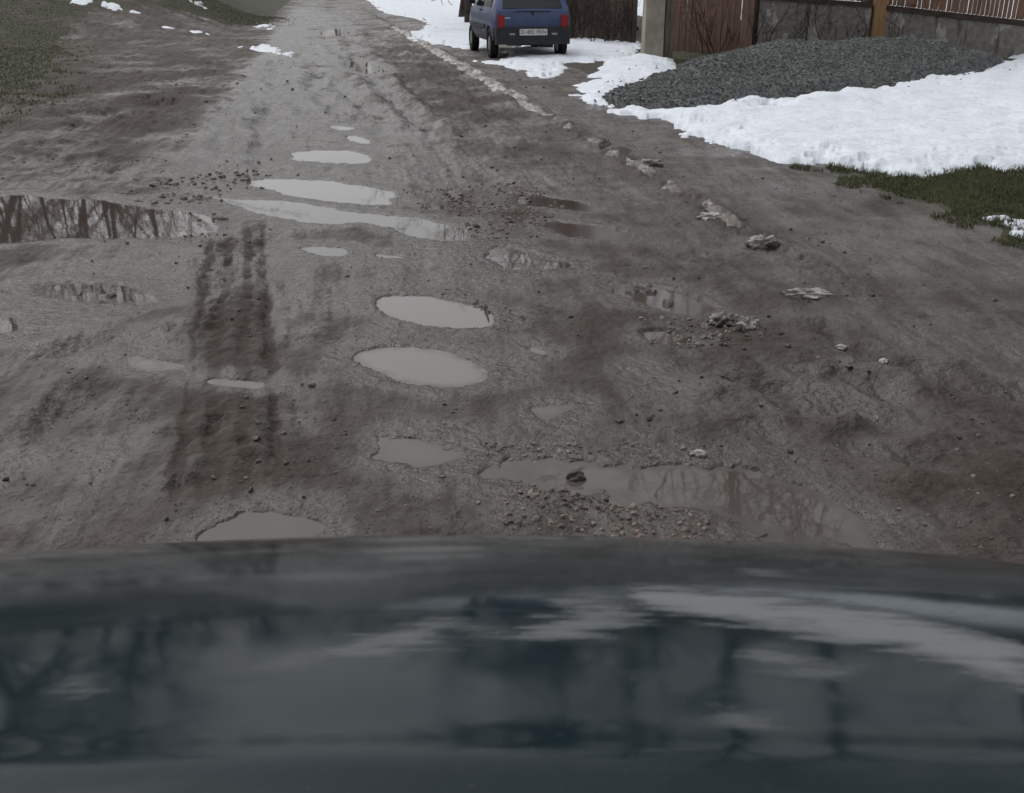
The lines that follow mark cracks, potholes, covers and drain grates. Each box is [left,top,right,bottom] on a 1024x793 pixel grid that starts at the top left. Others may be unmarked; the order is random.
pothole [166,488,353,543]
pothole [523,217,656,245]
pothole [231,174,416,207]
pothole [274,147,388,165]
pothole [195,192,496,247]
pothole [352,286,522,336]
pothole [284,241,371,259]
pothole [325,335,520,397]
pothole [517,395,593,427]
pothole [468,442,938,551]
pothole [105,347,217,378]
